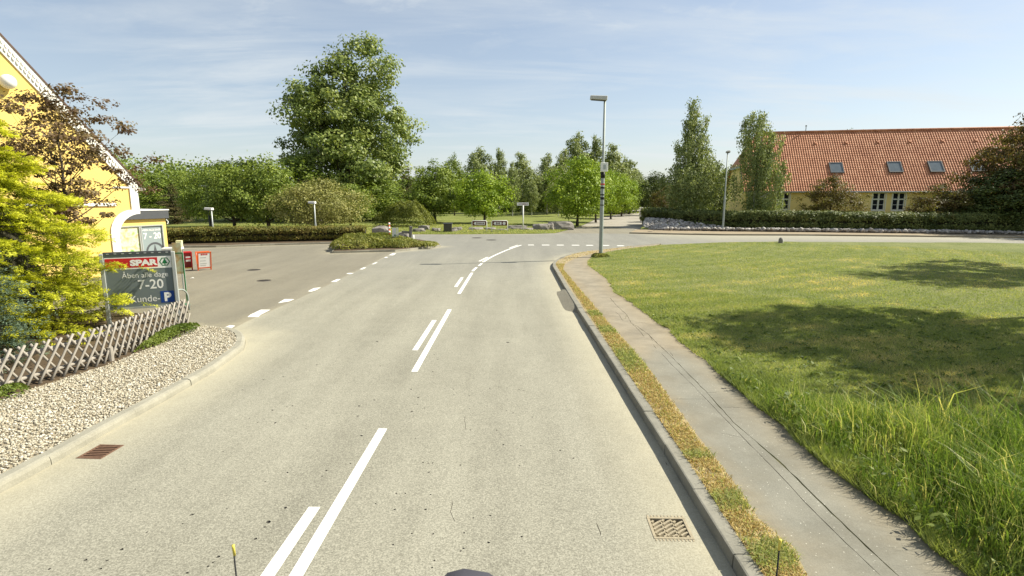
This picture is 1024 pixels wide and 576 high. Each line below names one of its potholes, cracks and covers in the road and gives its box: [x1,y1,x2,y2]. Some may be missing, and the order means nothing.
drain grate [76,444,124,459]
drain grate [646,515,695,542]
